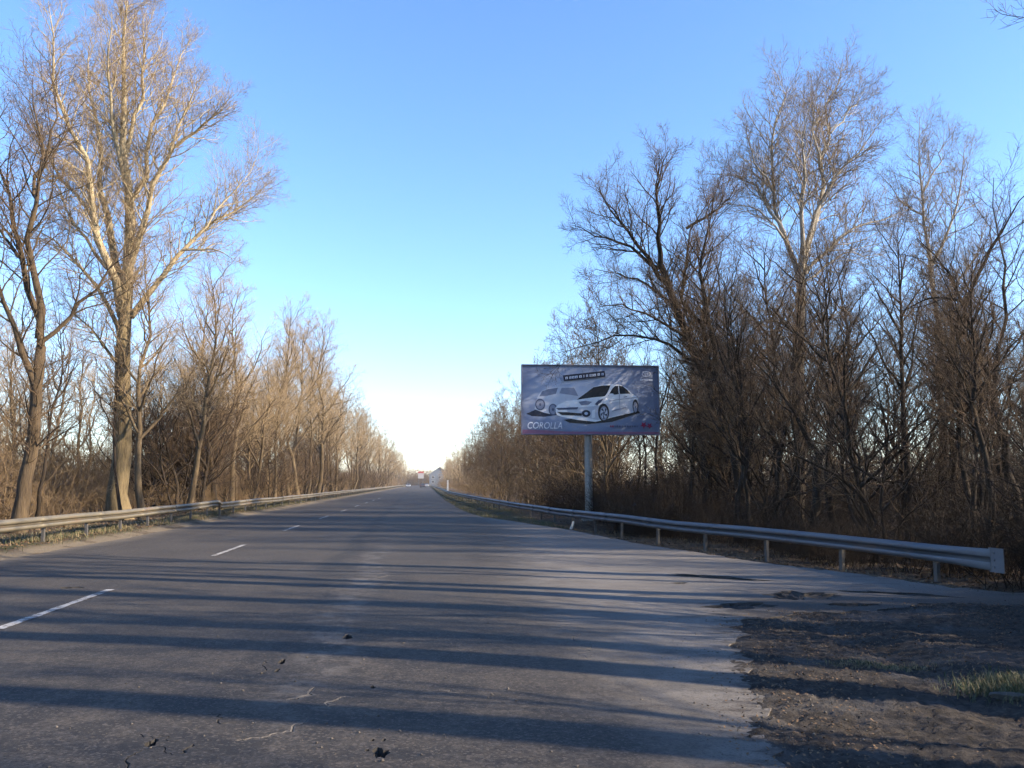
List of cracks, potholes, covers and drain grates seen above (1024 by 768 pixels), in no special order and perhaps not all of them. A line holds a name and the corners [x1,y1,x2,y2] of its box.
crack [208,687,351,741]
crack [124,734,195,768]
pothole [701,602,778,610]
pothole [762,590,841,600]
pothole [671,573,783,582]
